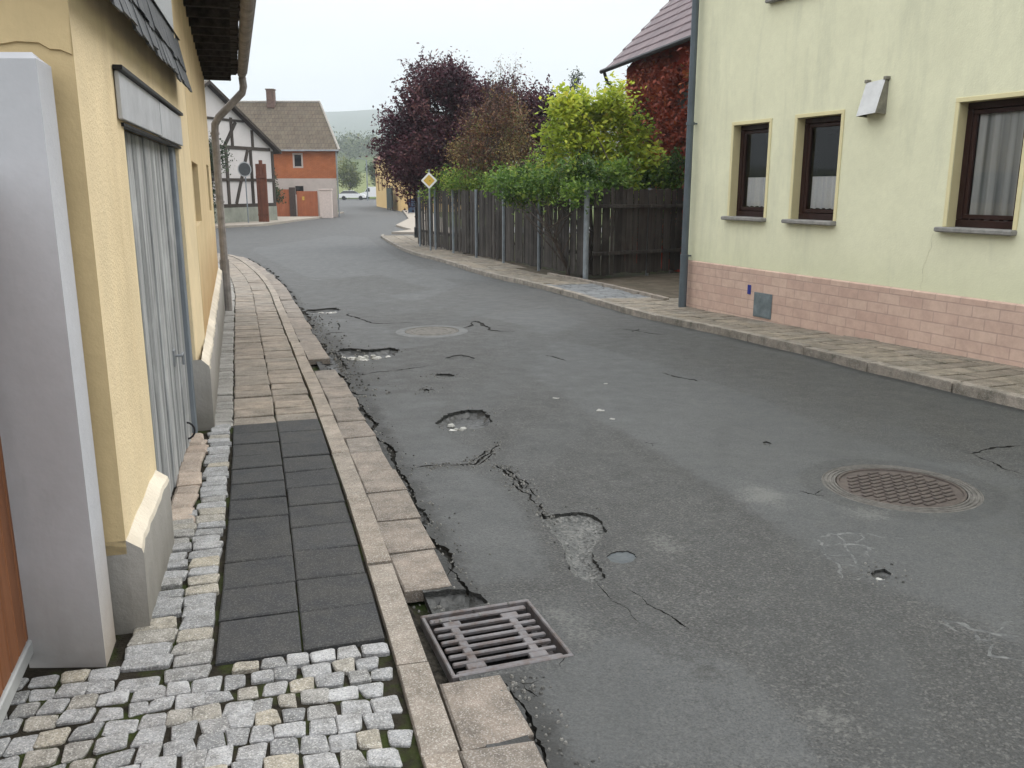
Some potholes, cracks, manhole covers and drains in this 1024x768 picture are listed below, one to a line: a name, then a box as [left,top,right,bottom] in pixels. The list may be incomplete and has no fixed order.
pothole [423,589,488,614]
crack [338,367,545,595]
crack [815,532,908,580]
crack [464,321,498,331]
drain grate [420,599,574,683]
pothole [337,347,400,361]
crack [964,446,1023,474]
pothole [607,551,636,564]
manhole cover [395,325,468,338]
pothole [539,512,607,583]
crack [599,586,689,629]
pothole [435,410,493,431]
